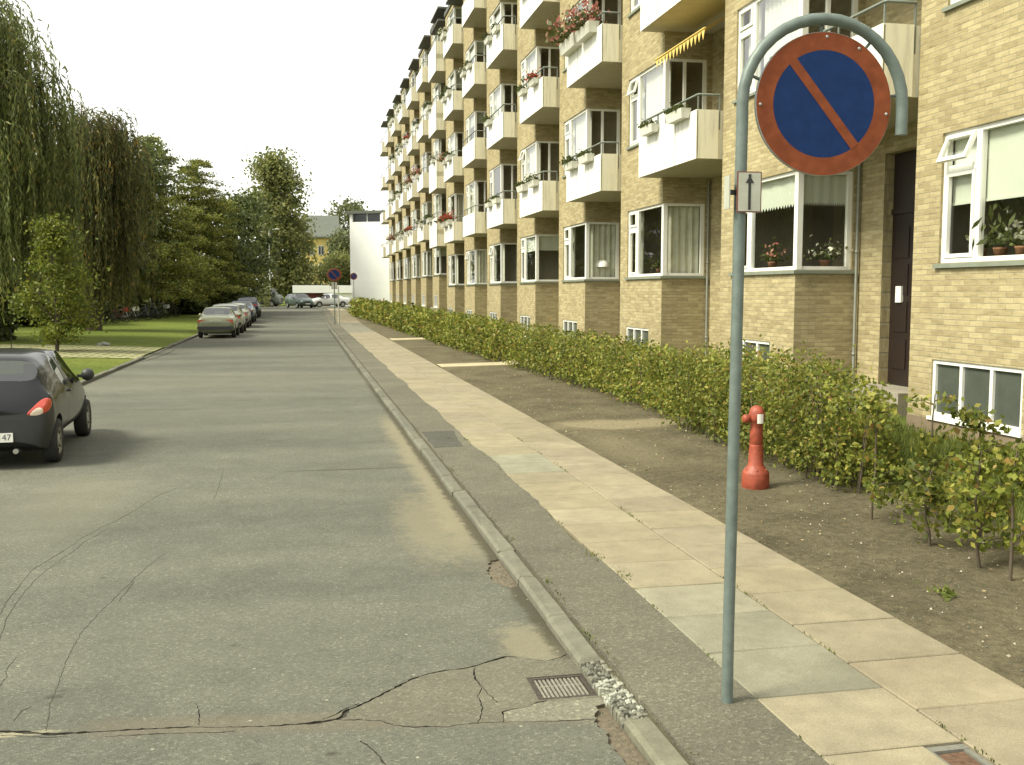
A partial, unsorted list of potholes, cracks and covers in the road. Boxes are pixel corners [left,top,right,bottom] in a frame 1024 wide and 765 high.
drain grate [527,674,598,722]
pothole [486,559,518,588]
crack [0,553,597,765]
crack [0,488,176,639]
manhole cover [926,744,993,765]
pothole [594,704,649,765]
